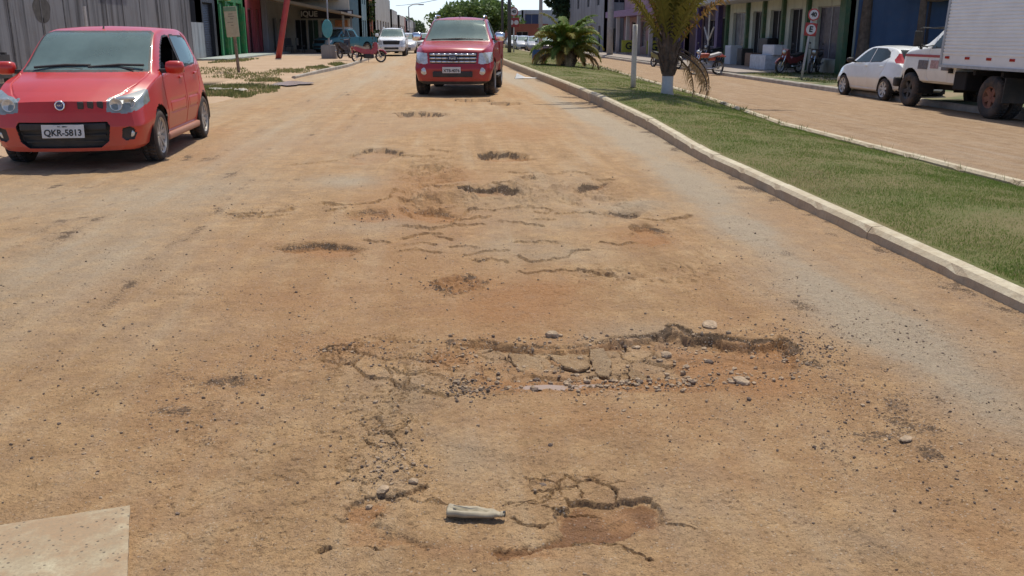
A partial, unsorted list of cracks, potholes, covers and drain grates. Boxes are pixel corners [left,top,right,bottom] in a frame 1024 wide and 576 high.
crack [316,334,626,555]
pothole [336,147,409,166]
pothole [476,492,673,567]
pothole [390,111,455,119]
pothole [440,321,813,403]
pothole [467,150,542,163]
pothole [565,180,615,198]
pothole [266,239,377,260]
pothole [425,272,495,298]
pothole [621,221,680,249]
crack [320,148,693,278]
pothole [446,182,530,203]
